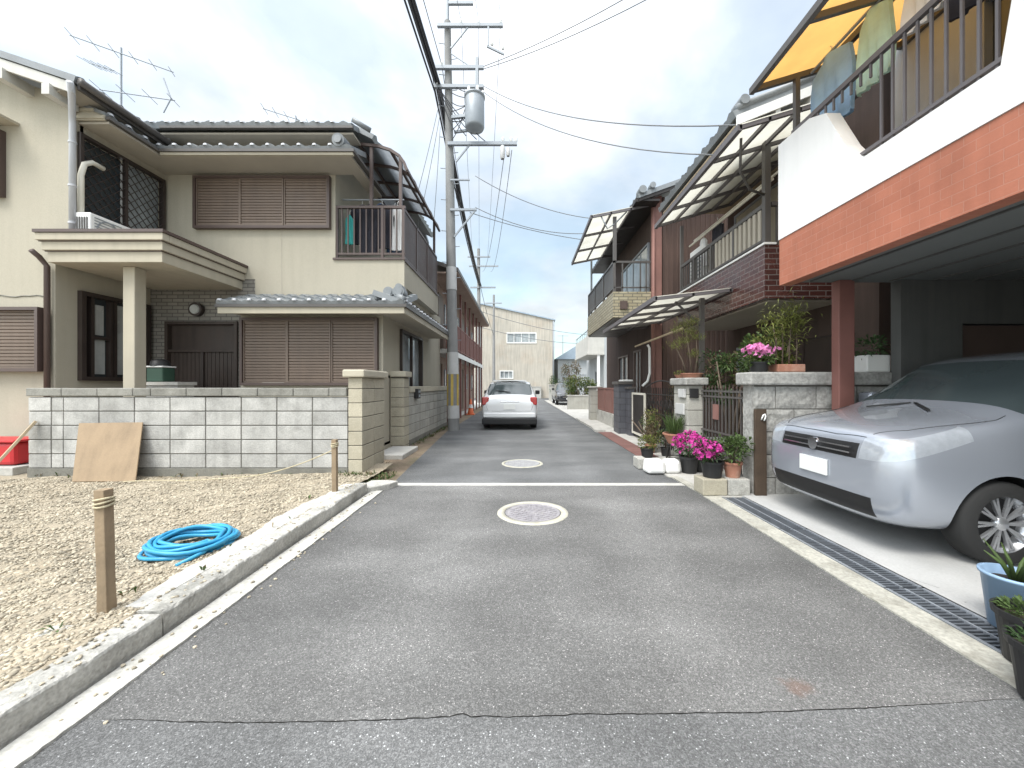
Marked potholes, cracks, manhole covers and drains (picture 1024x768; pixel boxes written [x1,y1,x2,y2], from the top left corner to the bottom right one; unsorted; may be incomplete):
drain grate [722,497,806,530]
manhole cover [502,459,543,468]
crack [123,699,1008,723]
drain grate [780,529,922,589]
drain grate [885,588,1002,654]
manhole cover [497,501,568,525]
